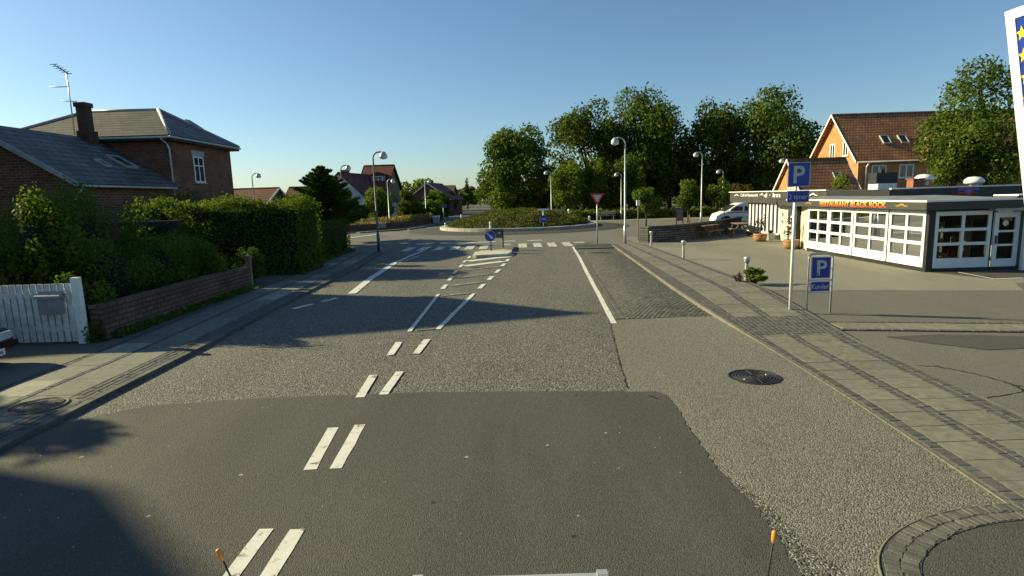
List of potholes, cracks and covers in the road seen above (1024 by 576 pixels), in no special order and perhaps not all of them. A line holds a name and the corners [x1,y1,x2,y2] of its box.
crack [920,365,1024,398]
manhole cover [728,369,782,385]
manhole cover [5,397,71,416]
